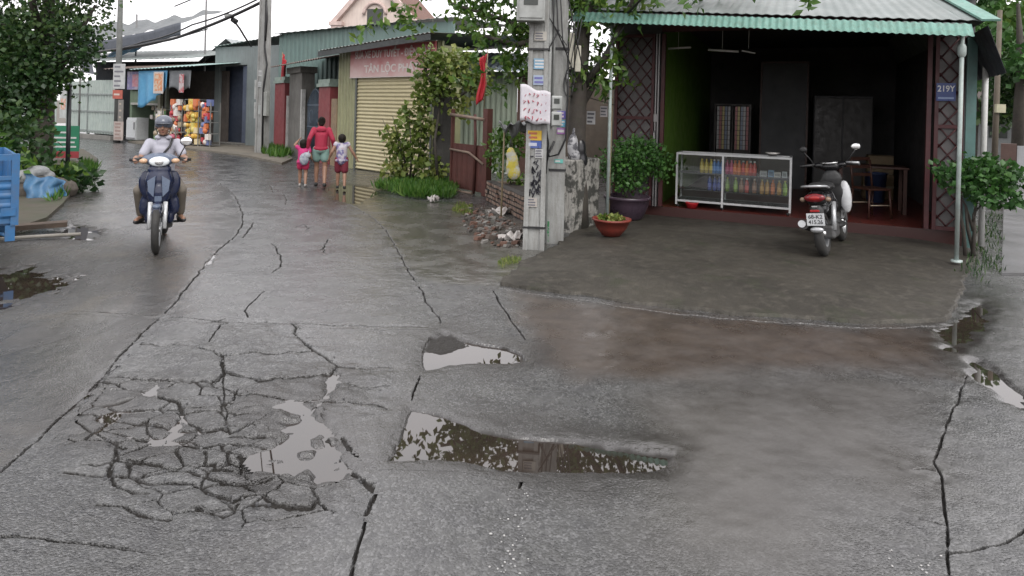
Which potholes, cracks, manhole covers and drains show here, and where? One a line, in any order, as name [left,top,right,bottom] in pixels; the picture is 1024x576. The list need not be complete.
crack [897,371,1024,576]
crack [0,164,949,576]
pothole [407,327,538,376]
pothole [369,401,694,483]
